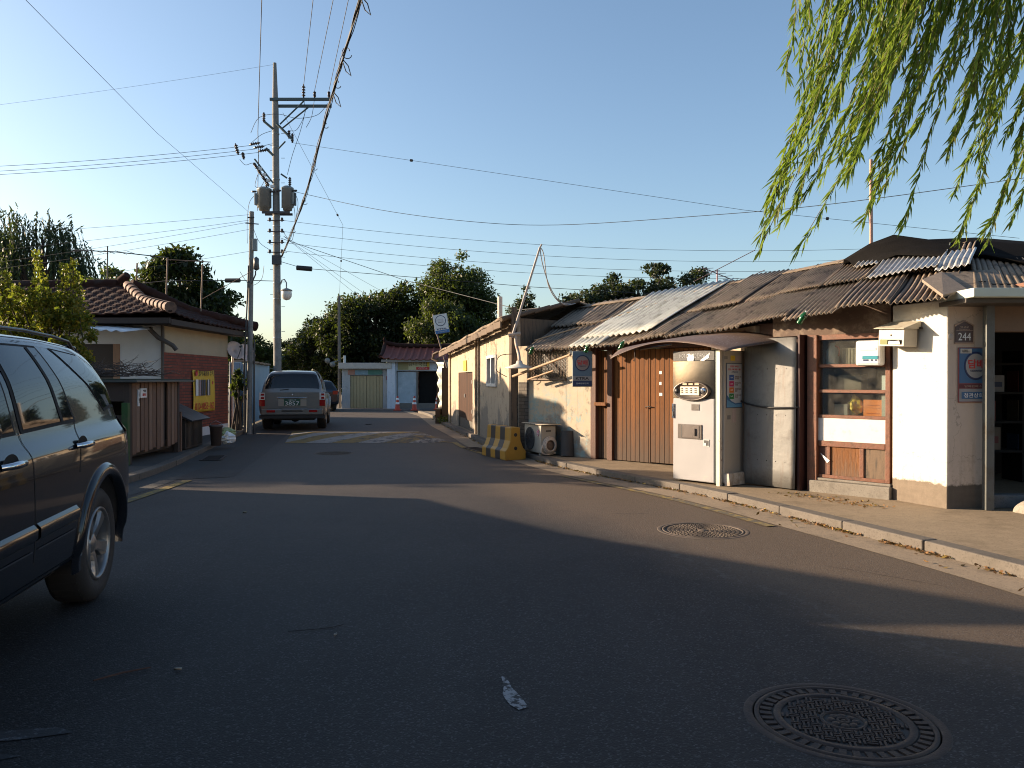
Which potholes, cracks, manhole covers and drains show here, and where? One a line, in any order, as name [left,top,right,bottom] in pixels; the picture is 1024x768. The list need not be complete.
manhole cover [657,522,750,539]
manhole cover [743,683,953,767]
